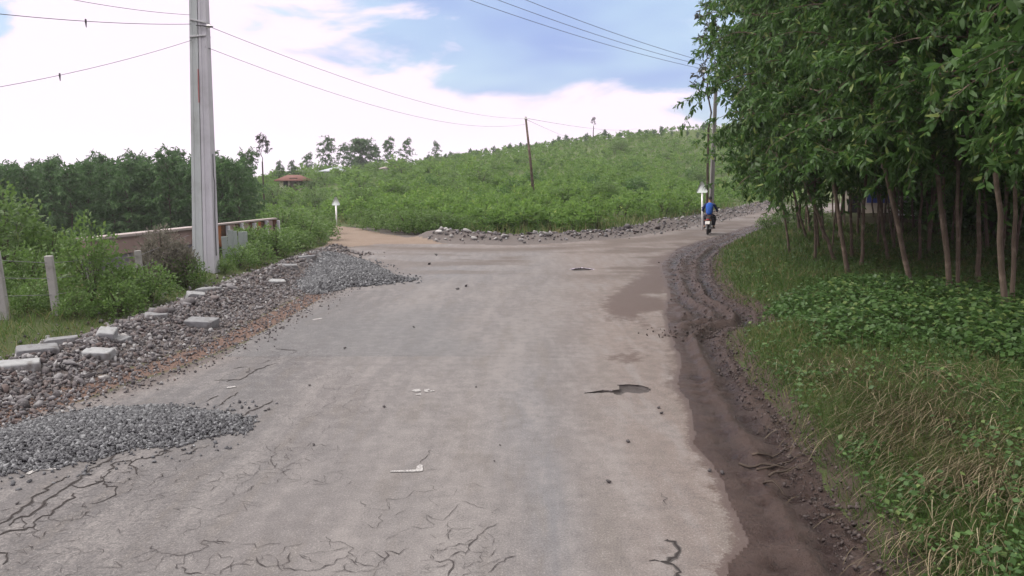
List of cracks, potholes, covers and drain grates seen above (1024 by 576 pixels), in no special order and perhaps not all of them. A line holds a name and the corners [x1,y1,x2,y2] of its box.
crack [0,349,387,576]
crack [649,539,682,576]
pothole [586,384,651,395]
crack [362,449,513,576]
